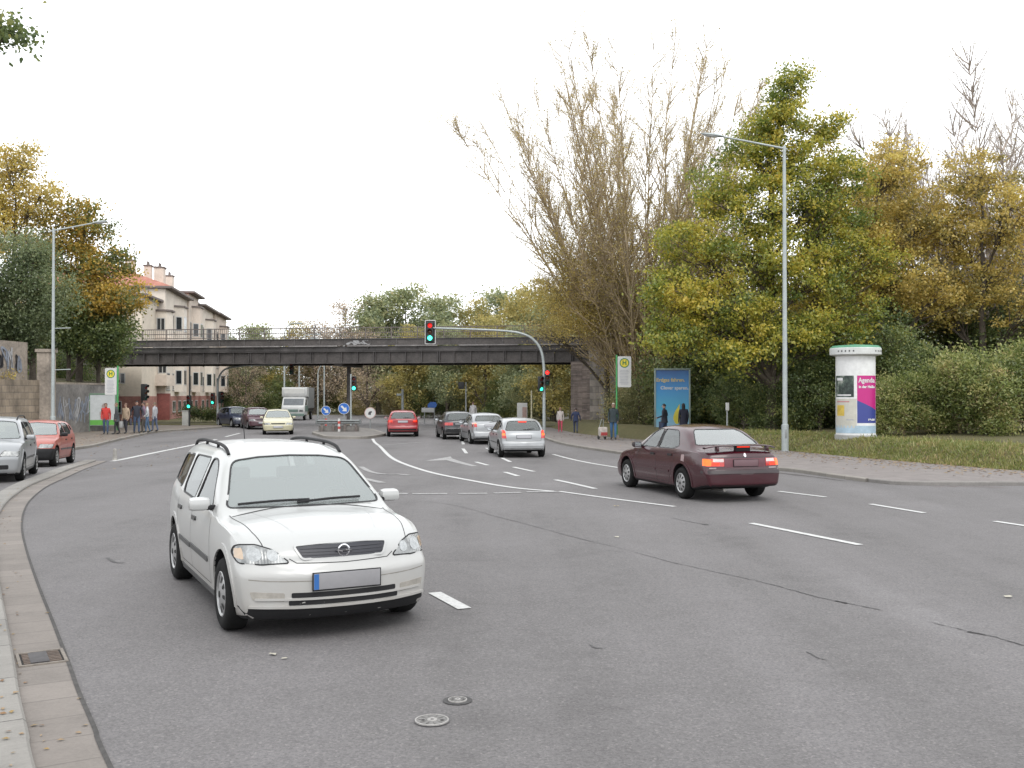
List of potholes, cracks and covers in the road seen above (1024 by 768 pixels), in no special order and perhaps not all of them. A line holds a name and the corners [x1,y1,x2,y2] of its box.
crack [636,552,879,610]
manhole cover [414,714,450,727]
manhole cover [443,696,472,705]
drain grate [15,648,69,668]
